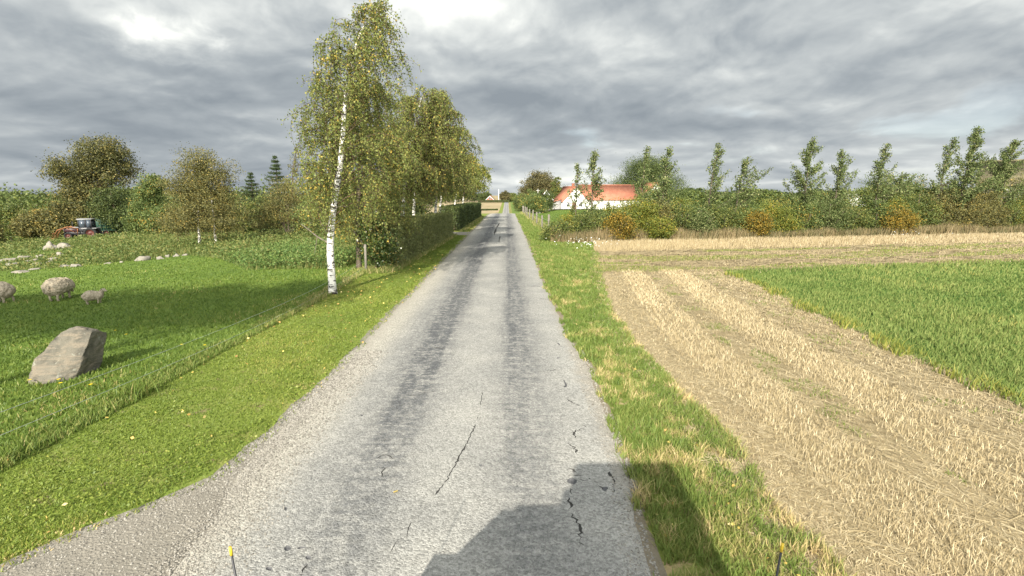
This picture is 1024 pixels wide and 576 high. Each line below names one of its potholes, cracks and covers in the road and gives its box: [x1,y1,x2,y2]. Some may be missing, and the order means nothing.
crack [435,393,483,495]
crack [567,425,615,545]
